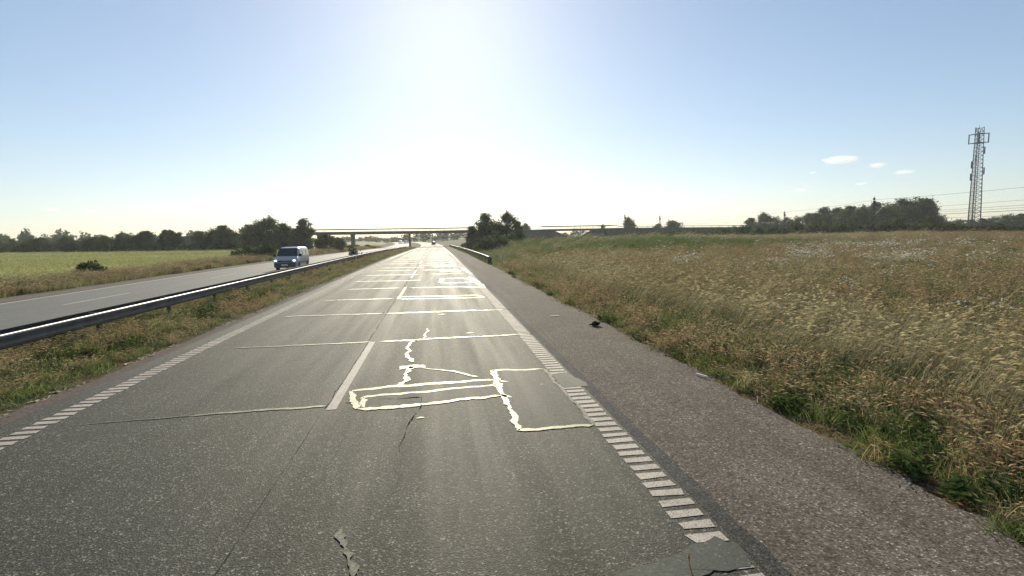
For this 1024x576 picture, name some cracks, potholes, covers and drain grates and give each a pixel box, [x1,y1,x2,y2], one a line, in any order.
crack [383,397,422,450]
